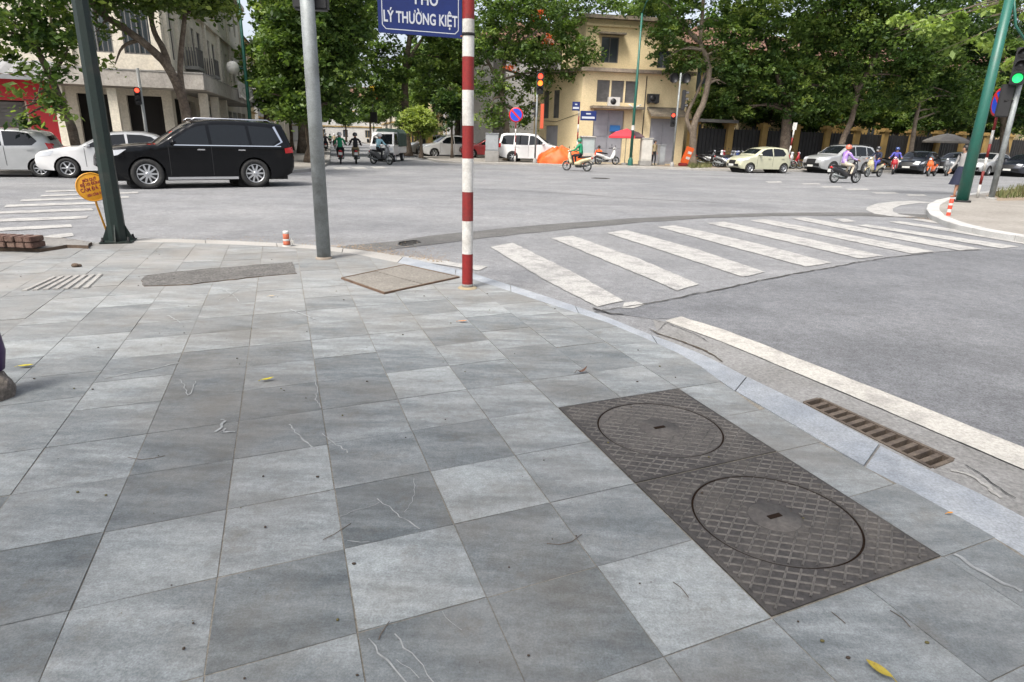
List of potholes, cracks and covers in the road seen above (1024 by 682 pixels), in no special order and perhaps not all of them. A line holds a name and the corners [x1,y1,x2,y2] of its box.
utility cover [341,264,460,294]
manhole cover [637,452,940,617]
drain grate [803,397,955,469]
manhole cover [559,389,776,483]
